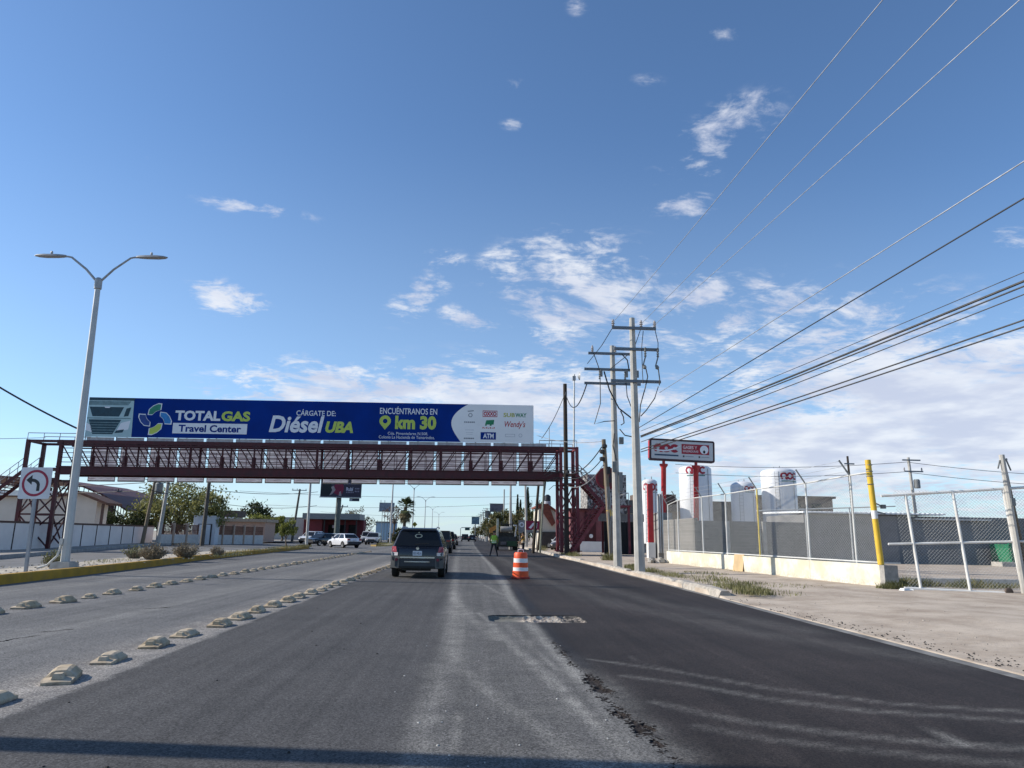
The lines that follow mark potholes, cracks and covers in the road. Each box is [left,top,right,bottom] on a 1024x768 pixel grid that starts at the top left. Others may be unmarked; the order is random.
pothole [488,615,586,623]
crack [551,641,681,768]
